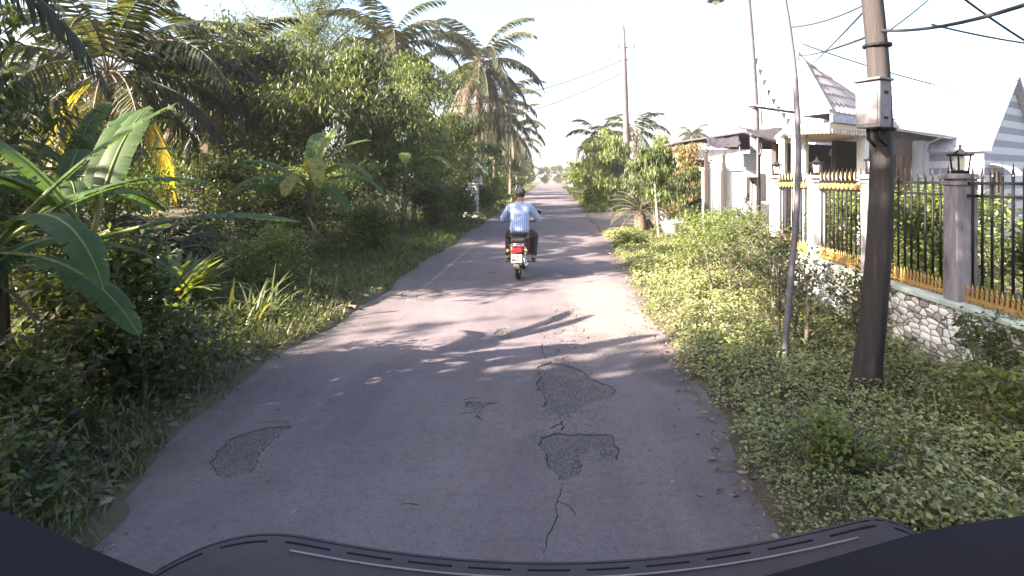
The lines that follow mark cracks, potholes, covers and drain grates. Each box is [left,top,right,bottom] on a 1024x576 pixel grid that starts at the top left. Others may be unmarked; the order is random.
pothole [194,419,301,485]
crack [544,489,576,550]
pothole [452,398,507,414]
pothole [523,358,629,421]
pothole [523,426,635,490]
crack [539,309,589,360]
